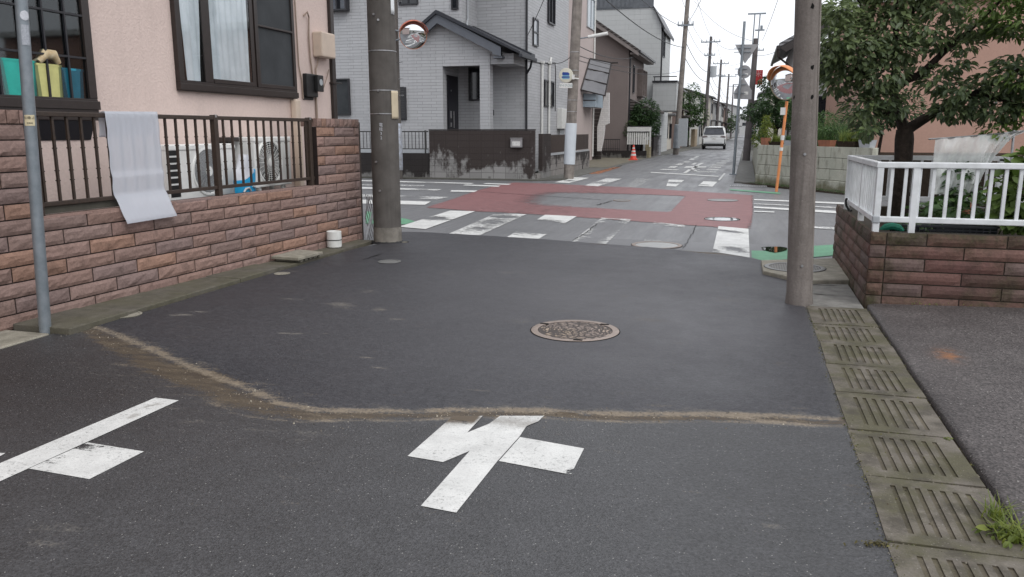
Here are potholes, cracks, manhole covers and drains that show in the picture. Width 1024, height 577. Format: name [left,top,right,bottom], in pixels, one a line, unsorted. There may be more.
manhole cover [631,241,683,249]
manhole cover [764,262,826,272]
manhole cover [530,320,620,342]
